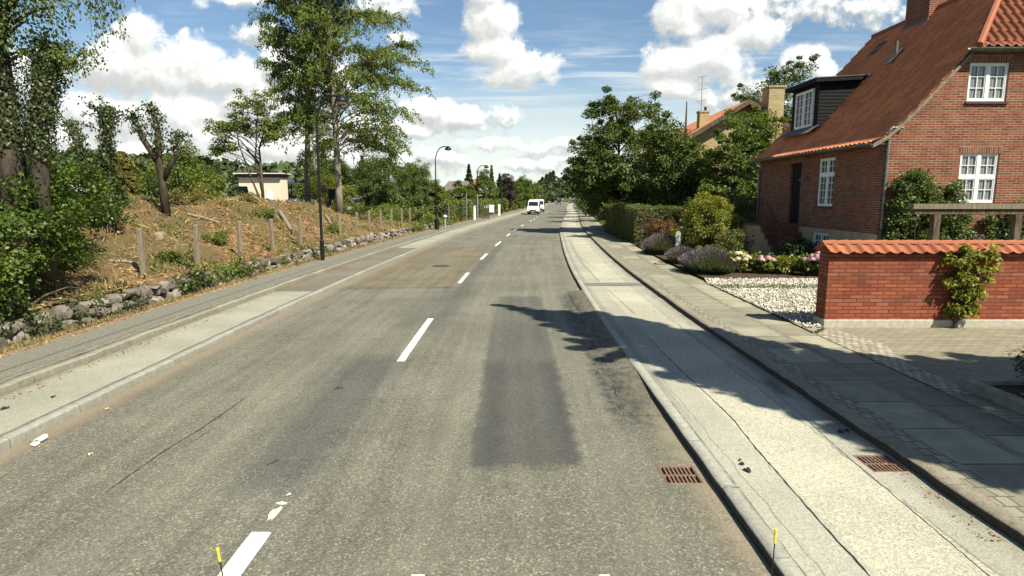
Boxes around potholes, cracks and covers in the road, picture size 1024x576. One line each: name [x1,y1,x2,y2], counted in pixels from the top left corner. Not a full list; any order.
drain grate [657,466,704,484]
crack [106,397,246,492]
drain grate [852,455,911,472]
